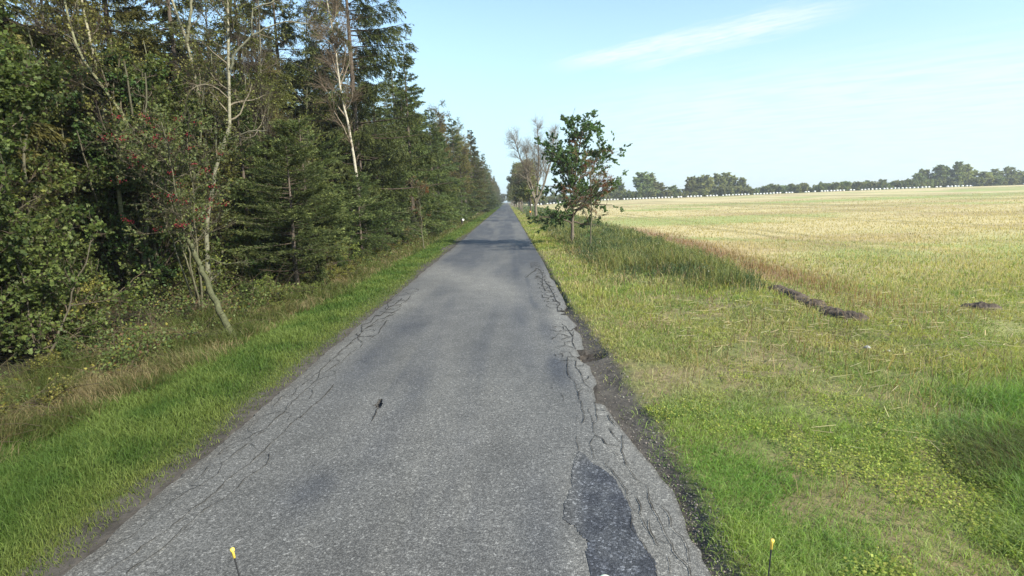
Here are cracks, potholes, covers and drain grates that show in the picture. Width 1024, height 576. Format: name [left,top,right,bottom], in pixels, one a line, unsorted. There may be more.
crack [527,262,691,576]
crack [91,288,416,575]
pothole [580,354,603,363]
